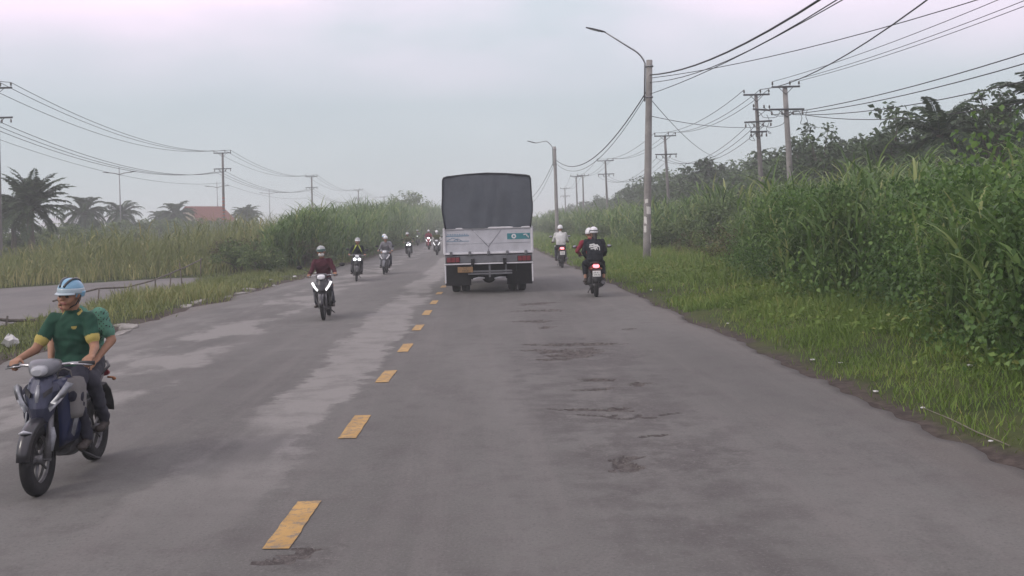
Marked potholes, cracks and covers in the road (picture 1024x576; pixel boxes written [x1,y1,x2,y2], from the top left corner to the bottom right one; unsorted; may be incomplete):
crack [547,408,681,438]
pothole [539,347,605,360]
pothole [608,455,646,473]
pothole [249,547,327,566]
